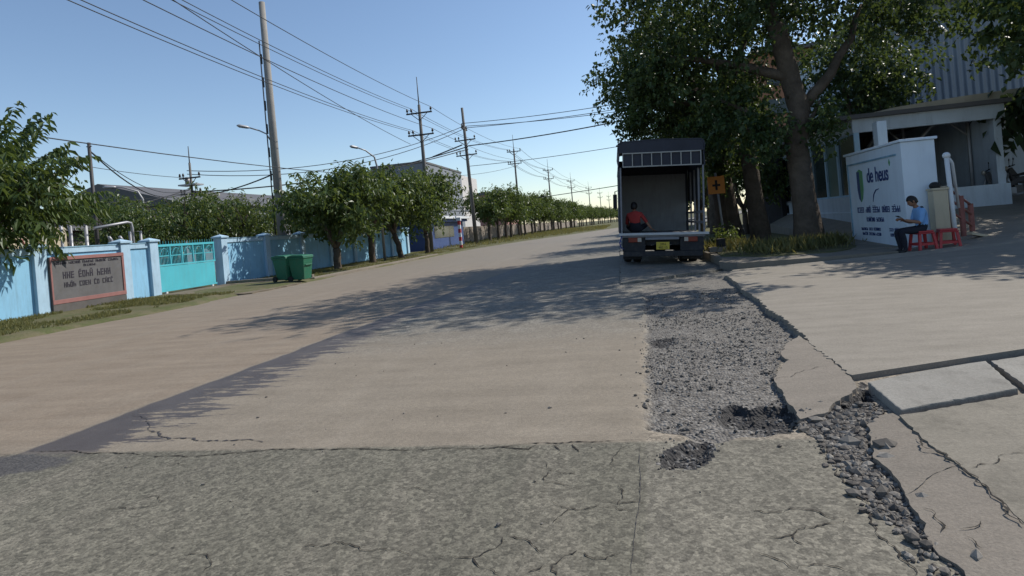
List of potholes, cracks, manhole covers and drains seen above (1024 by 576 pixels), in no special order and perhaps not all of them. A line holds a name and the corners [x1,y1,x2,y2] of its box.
crack [833,436,1024,575]
pothole [656,440,717,470]
crack [454,536,617,574]
crack [305,541,409,554]
pothole [841,382,875,410]
crack [58,415,641,522]
pothole [715,404,797,436]
